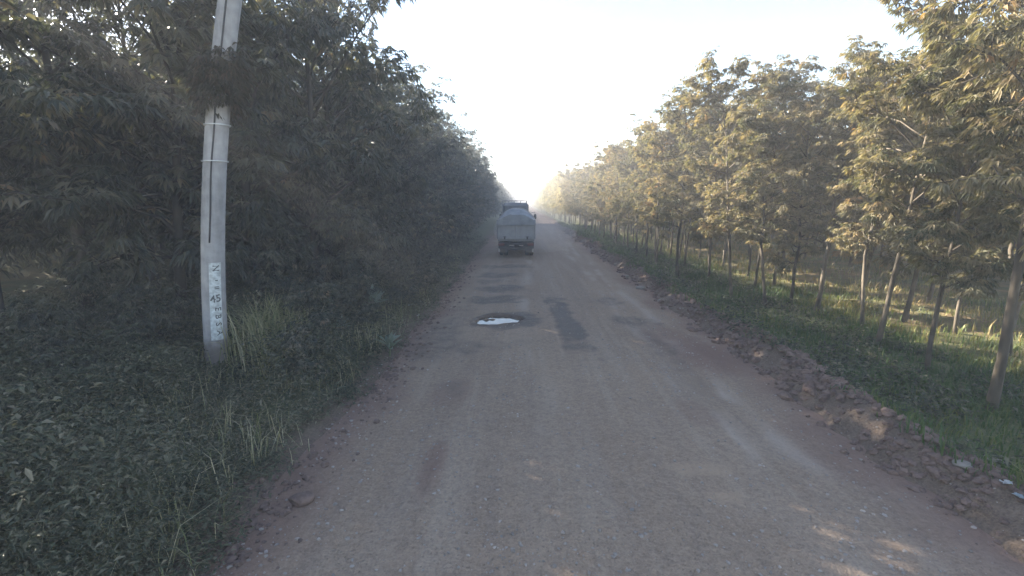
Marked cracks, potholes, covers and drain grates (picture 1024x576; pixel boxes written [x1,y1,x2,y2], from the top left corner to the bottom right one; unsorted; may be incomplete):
pothole [470,313,529,326]
